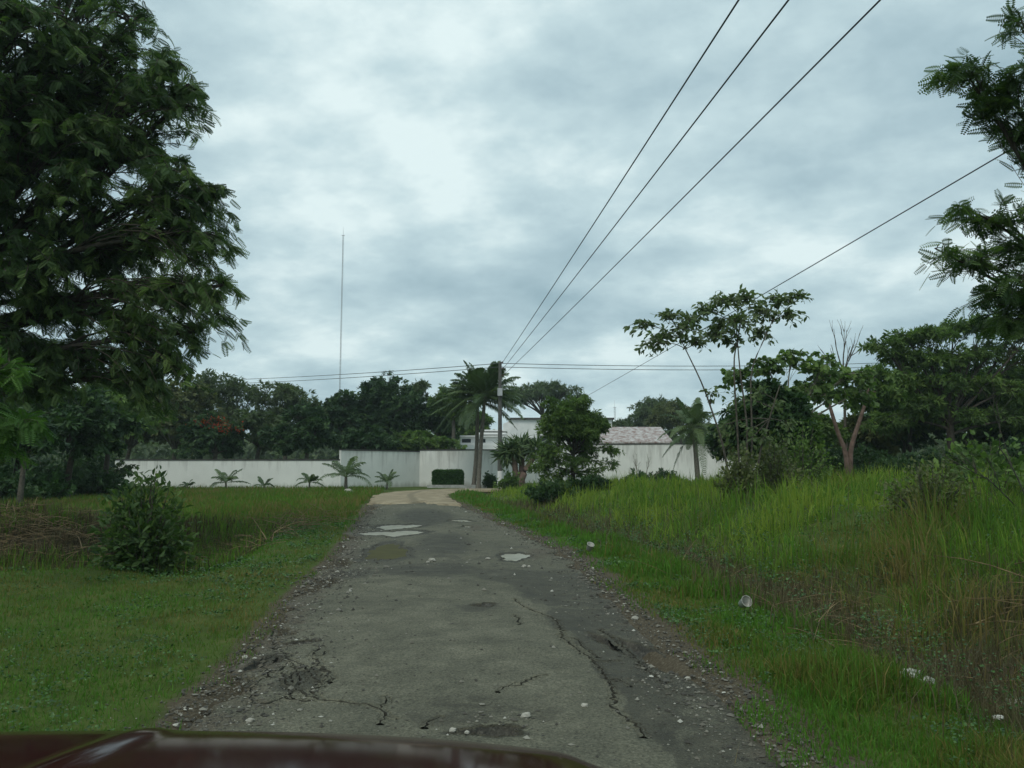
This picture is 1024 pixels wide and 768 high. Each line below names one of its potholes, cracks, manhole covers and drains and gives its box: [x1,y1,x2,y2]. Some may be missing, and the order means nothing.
crack [498,598,664,738]
pothole [359,542,412,561]
pothole [448,724,524,738]
crack [241,631,396,725]
crack [420,716,444,729]
